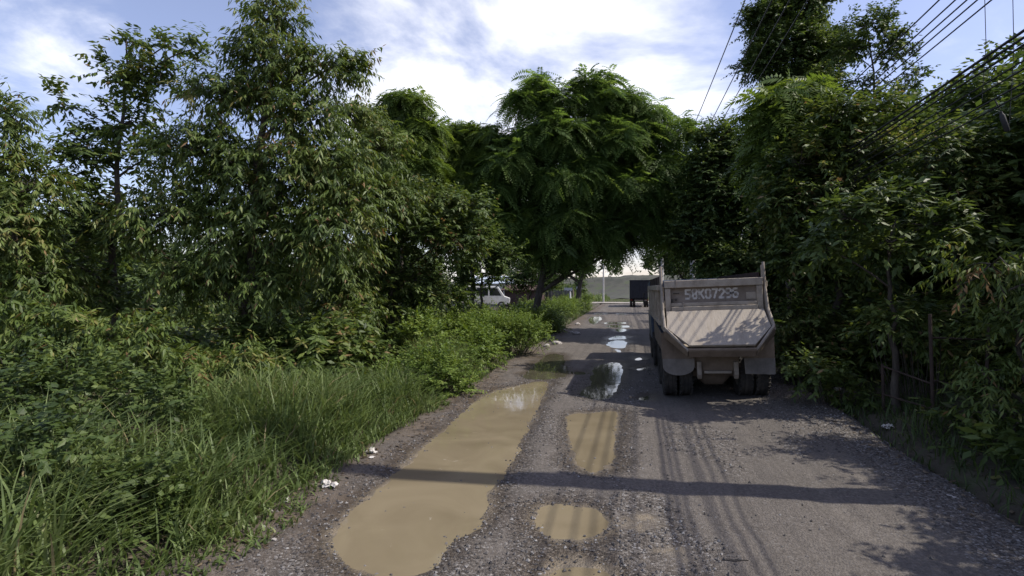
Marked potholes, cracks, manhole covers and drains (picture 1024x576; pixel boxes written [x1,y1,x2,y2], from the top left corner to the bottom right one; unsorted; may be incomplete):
pothole [586,316,605,324]
pothole [310,380,555,576]
pothole [519,496,620,548]
pothole [571,361,628,401]
pothole [556,408,628,477]
pothole [517,352,573,380]
pothole [602,339,632,348]
pothole [521,549,635,576]
